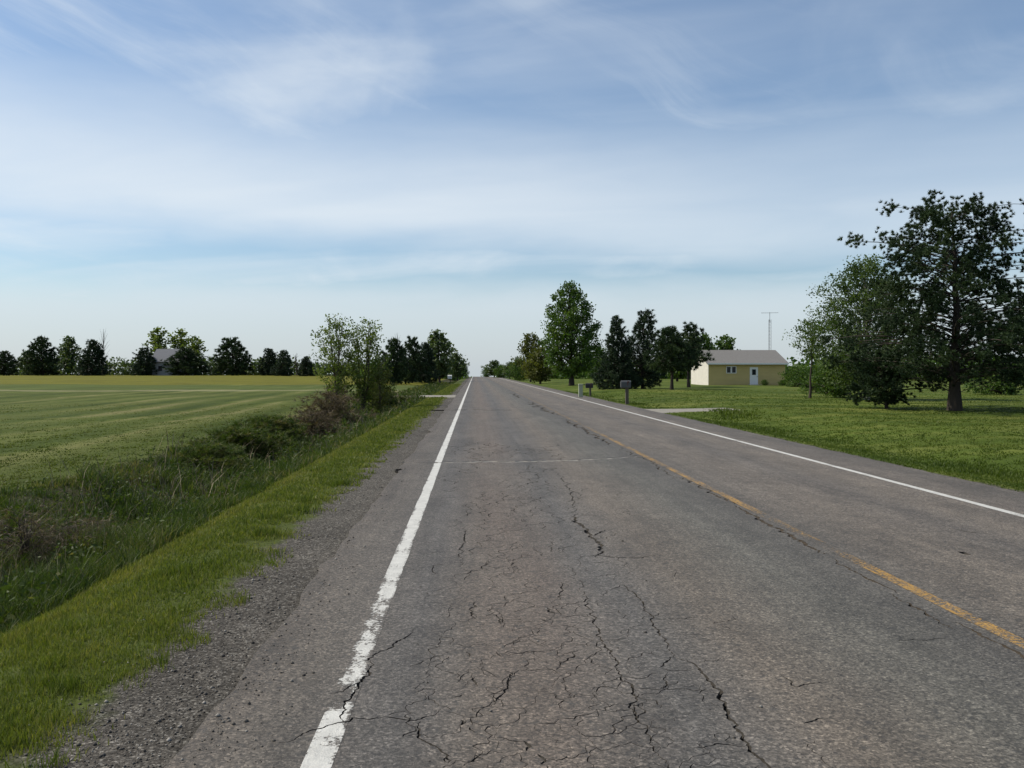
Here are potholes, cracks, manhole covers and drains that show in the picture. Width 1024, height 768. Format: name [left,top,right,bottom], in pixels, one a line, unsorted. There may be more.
crack [514,393,1024,659]
crack [280,442,833,768]
